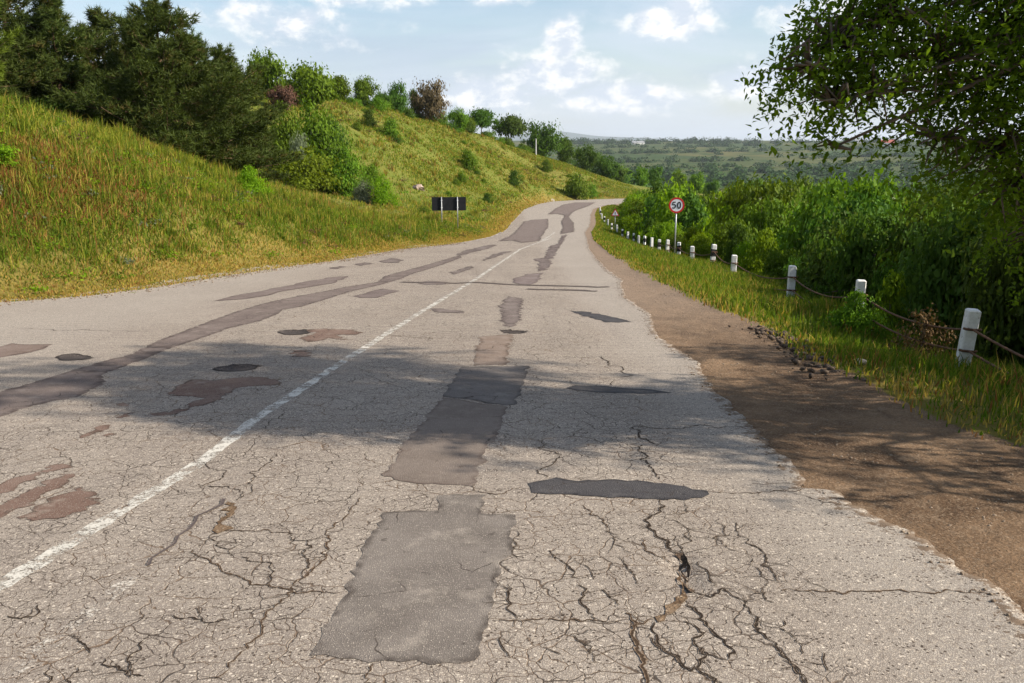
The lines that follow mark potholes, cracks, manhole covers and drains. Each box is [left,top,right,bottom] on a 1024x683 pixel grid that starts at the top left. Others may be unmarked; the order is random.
crack [191,452,278,500]
crack [484,499,830,683]
crack [461,440,562,499]
crack [8,603,54,619]
crack [44,634,148,683]
pothole [675,553,694,592]
crack [163,497,360,679]
crack [625,427,660,479]
